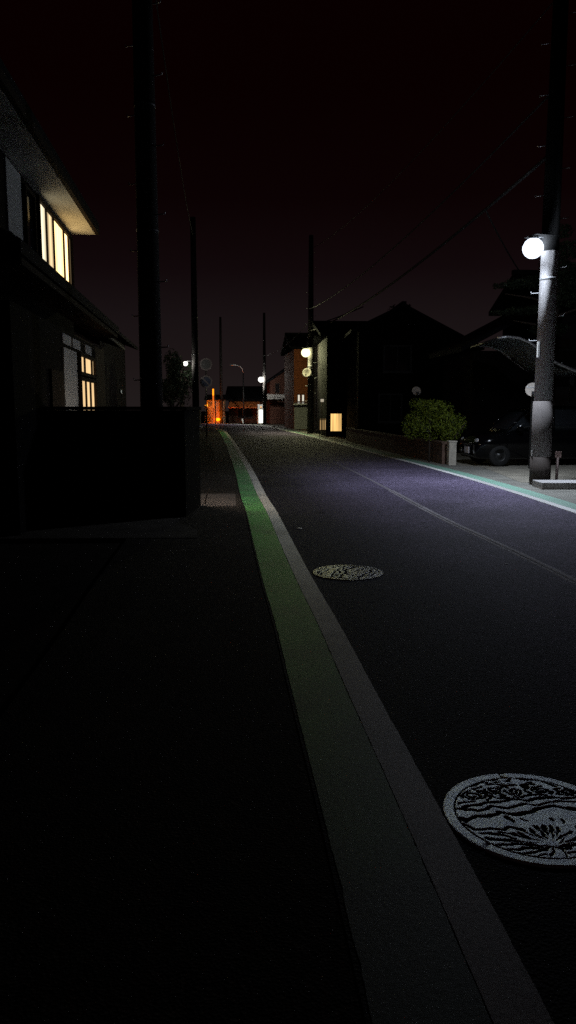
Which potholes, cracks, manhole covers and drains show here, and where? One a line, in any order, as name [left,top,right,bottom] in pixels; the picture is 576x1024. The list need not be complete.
manhole cover [443,773,576,869]
manhole cover [313,565,383,581]
